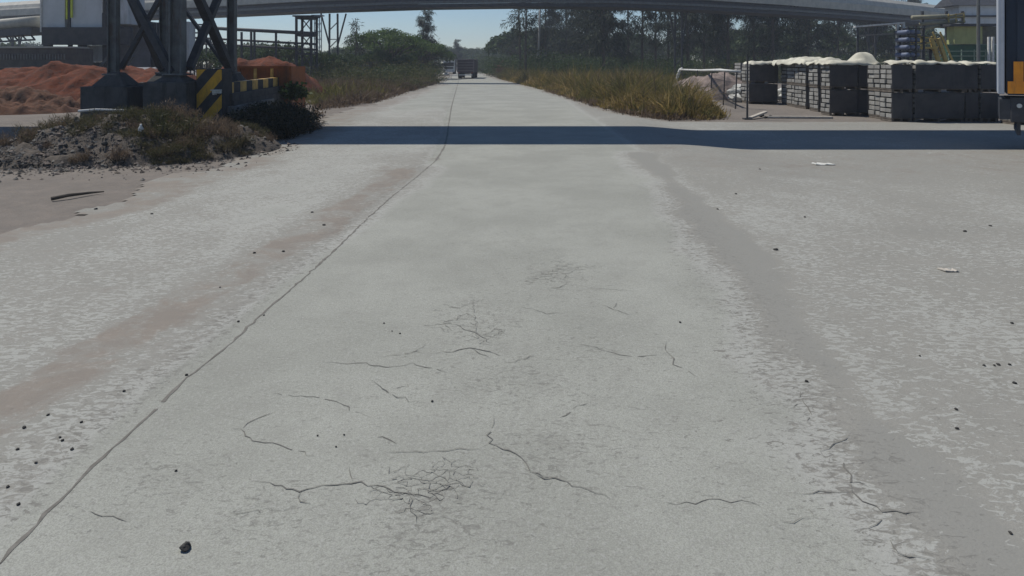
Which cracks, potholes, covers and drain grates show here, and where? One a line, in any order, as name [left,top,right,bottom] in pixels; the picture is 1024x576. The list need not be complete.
crack [516,344,697,377]
crack [260,423,609,518]
crack [335,299,509,402]
crack [802,436,930,559]
crack [233,412,314,456]
